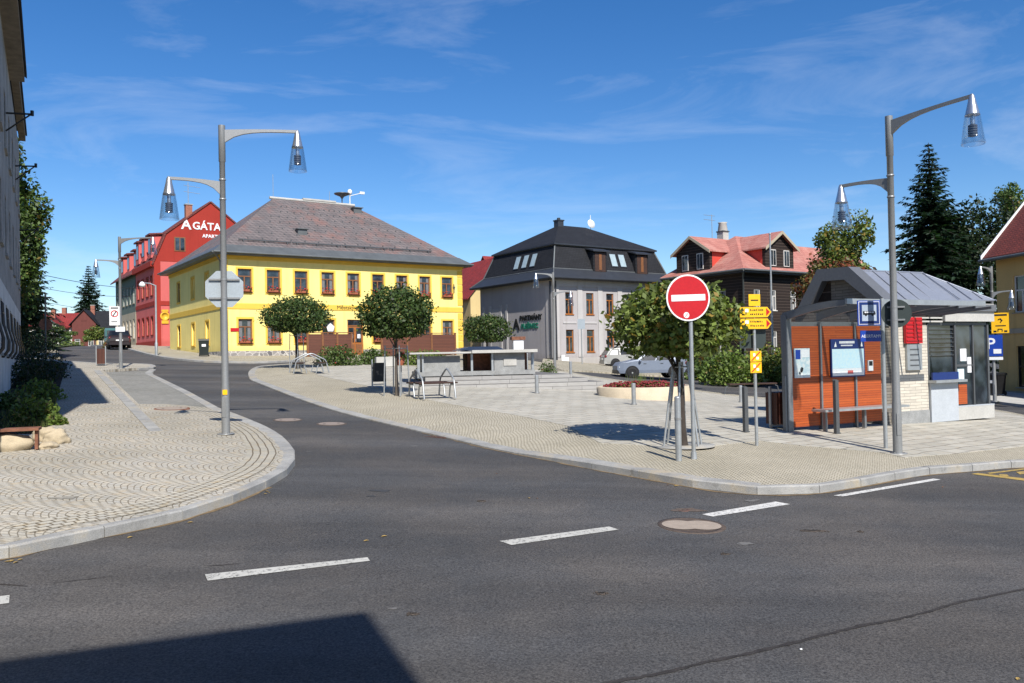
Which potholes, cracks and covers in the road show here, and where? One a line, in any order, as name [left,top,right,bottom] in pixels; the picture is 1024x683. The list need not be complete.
manhole cover [658,517,726,534]
